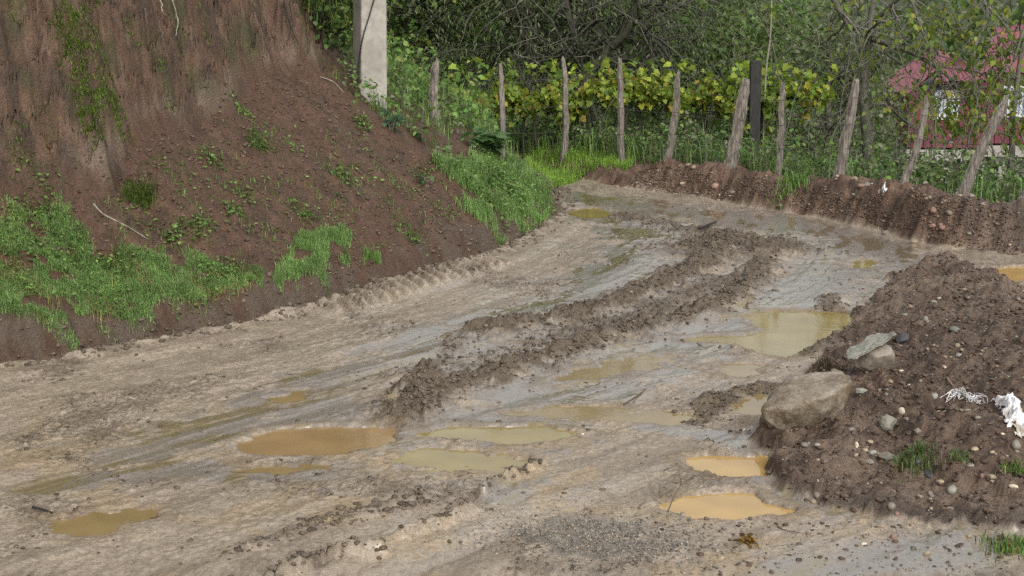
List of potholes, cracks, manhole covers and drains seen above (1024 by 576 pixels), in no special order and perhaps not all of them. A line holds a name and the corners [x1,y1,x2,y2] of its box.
pothole [678,448,775,477]
pothole [681,307,855,357]
pothole [649,485,800,520]
pothole [403,421,587,445]
pothole [370,438,539,474]
pothole [230,418,407,457]
pothole [39,501,167,541]
